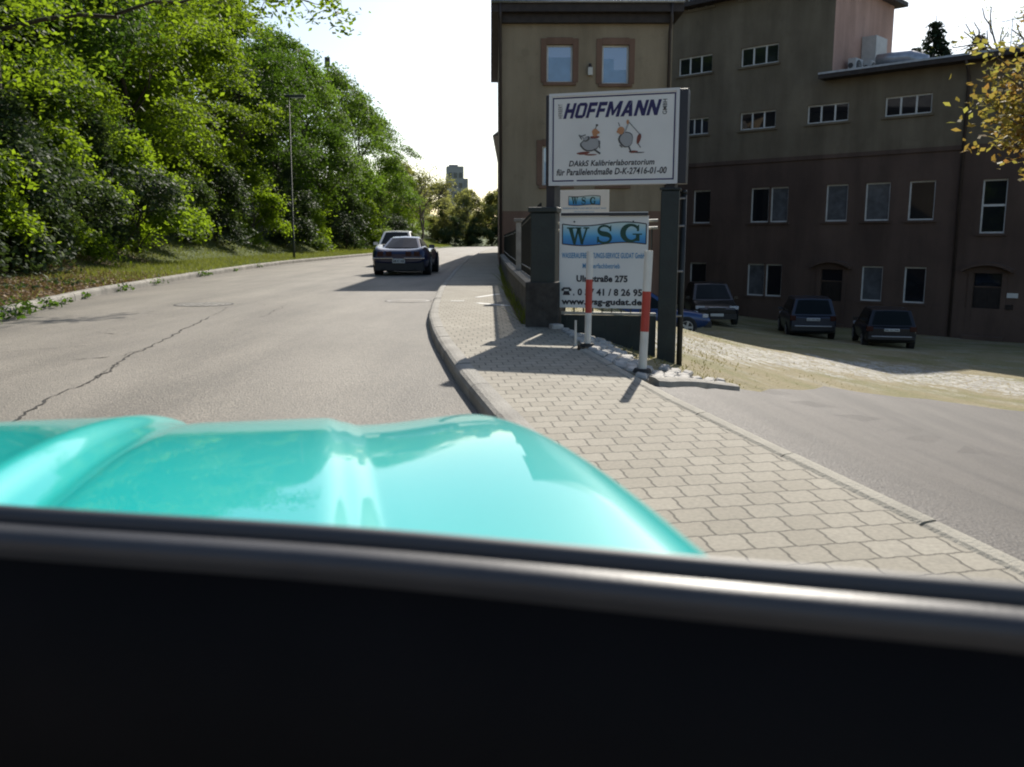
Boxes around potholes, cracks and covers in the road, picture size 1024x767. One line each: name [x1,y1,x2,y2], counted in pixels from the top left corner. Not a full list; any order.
crack [7,317,208,421]
